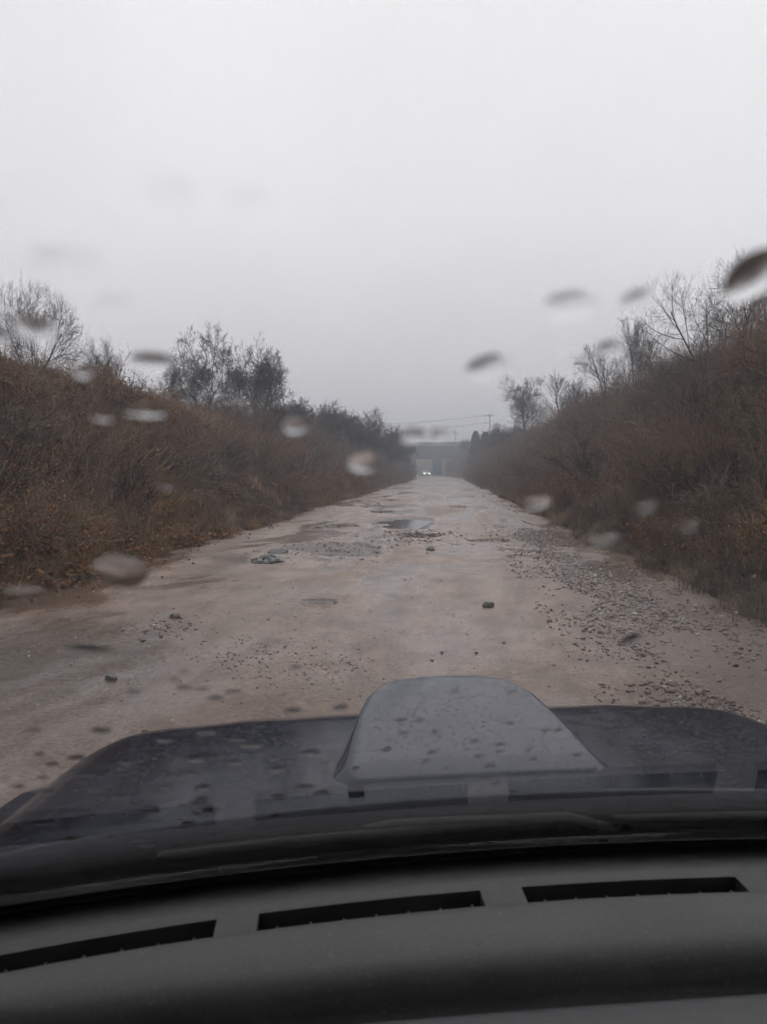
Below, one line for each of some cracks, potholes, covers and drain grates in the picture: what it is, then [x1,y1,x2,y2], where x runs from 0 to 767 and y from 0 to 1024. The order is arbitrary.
pothole [355,515,443,531]
pothole [270,540,391,559]
pothole [290,597,347,608]
